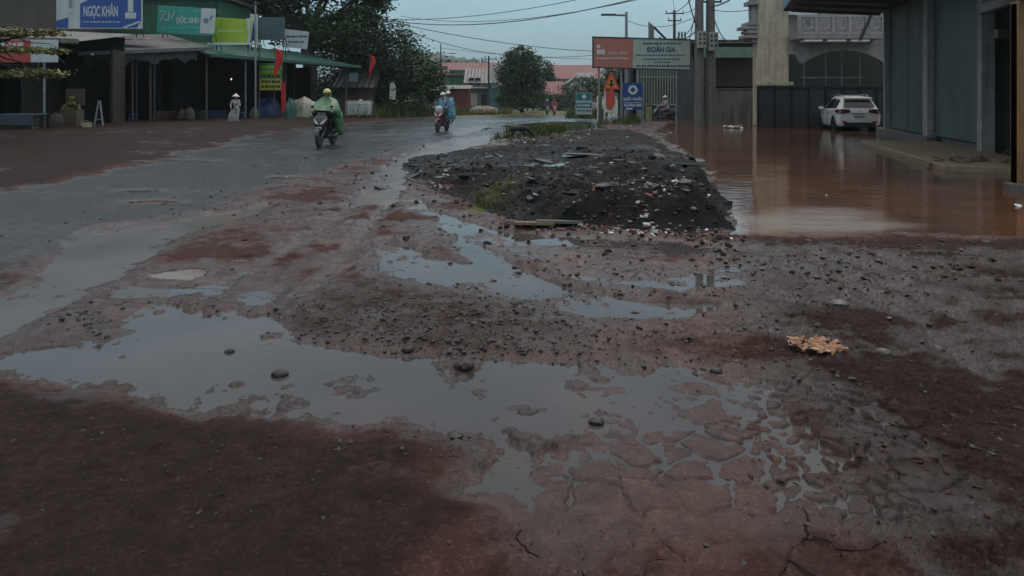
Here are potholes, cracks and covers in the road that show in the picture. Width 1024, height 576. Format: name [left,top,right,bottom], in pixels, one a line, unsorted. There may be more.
crack [514,506,881,576]
